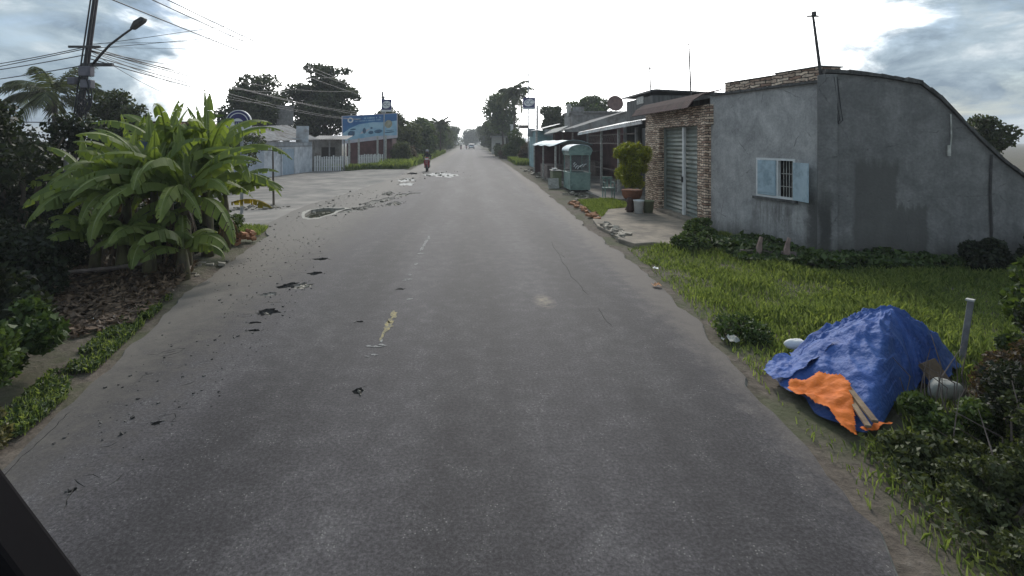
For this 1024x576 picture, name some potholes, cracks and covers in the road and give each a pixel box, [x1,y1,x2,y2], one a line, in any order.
pothole [251,307,286,316]
pothole [299,206,349,220]
pothole [422,171,465,179]
